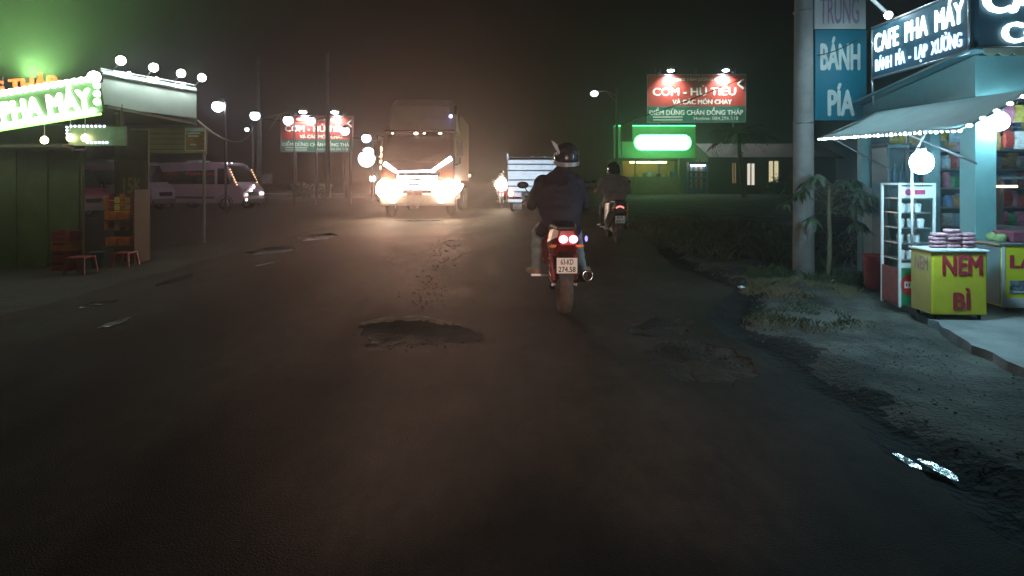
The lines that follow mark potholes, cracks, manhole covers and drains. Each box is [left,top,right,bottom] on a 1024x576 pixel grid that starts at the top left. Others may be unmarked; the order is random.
pothole [627,315,696,338]
pothole [244,246,296,255]
pothole [352,316,484,352]
pothole [297,233,337,241]
pothole [640,340,760,386]
